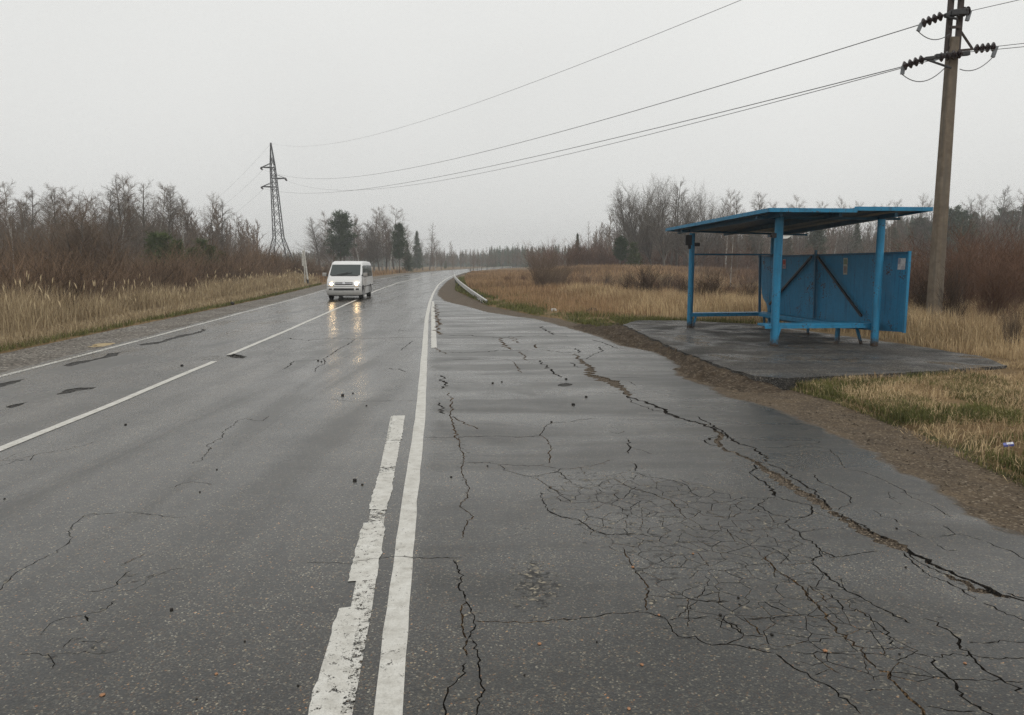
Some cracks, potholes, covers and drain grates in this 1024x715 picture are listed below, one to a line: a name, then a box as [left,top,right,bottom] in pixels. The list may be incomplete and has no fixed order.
crack [307,304,1024,715]
crack [284,330,413,372]
crack [21,554,180,667]
crack [0,512,181,590]
